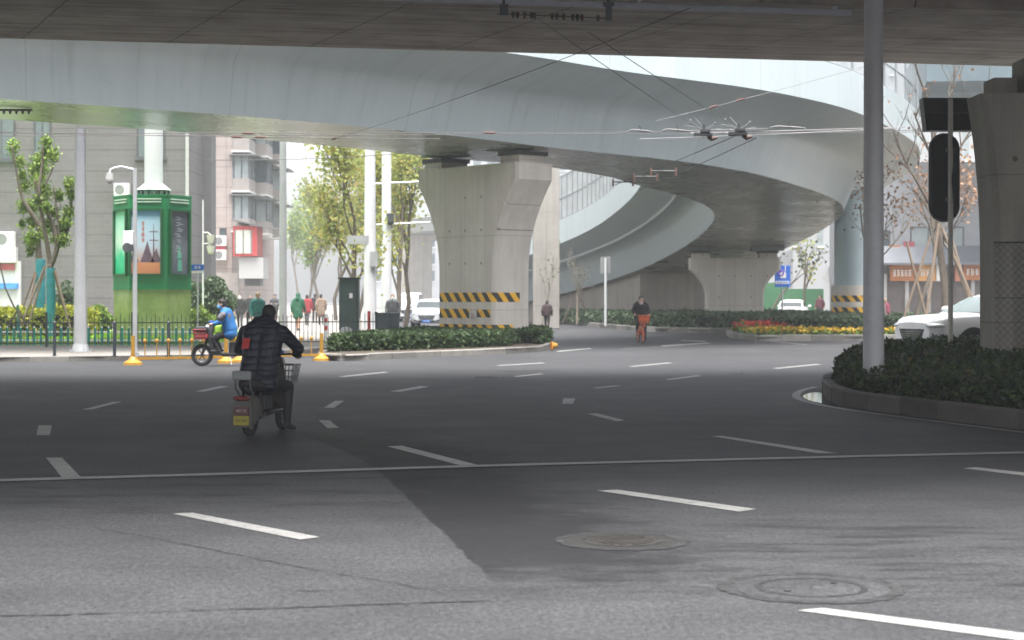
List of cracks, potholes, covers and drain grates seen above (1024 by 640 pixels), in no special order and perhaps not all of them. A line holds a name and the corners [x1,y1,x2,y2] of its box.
manhole cover [717,572,906,604]
manhole cover [555,531,690,551]
